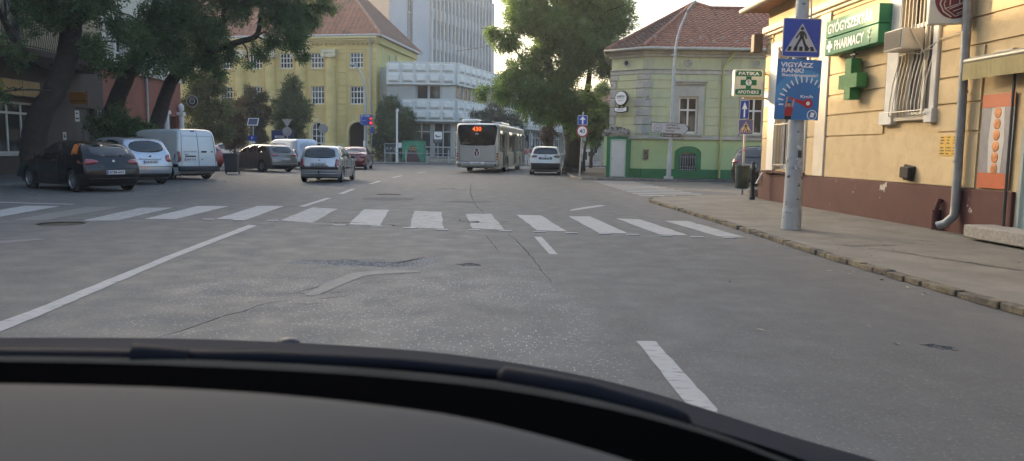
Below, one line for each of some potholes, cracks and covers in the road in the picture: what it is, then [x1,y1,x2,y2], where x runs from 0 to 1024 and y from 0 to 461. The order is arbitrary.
crack [157,287,342,338]
